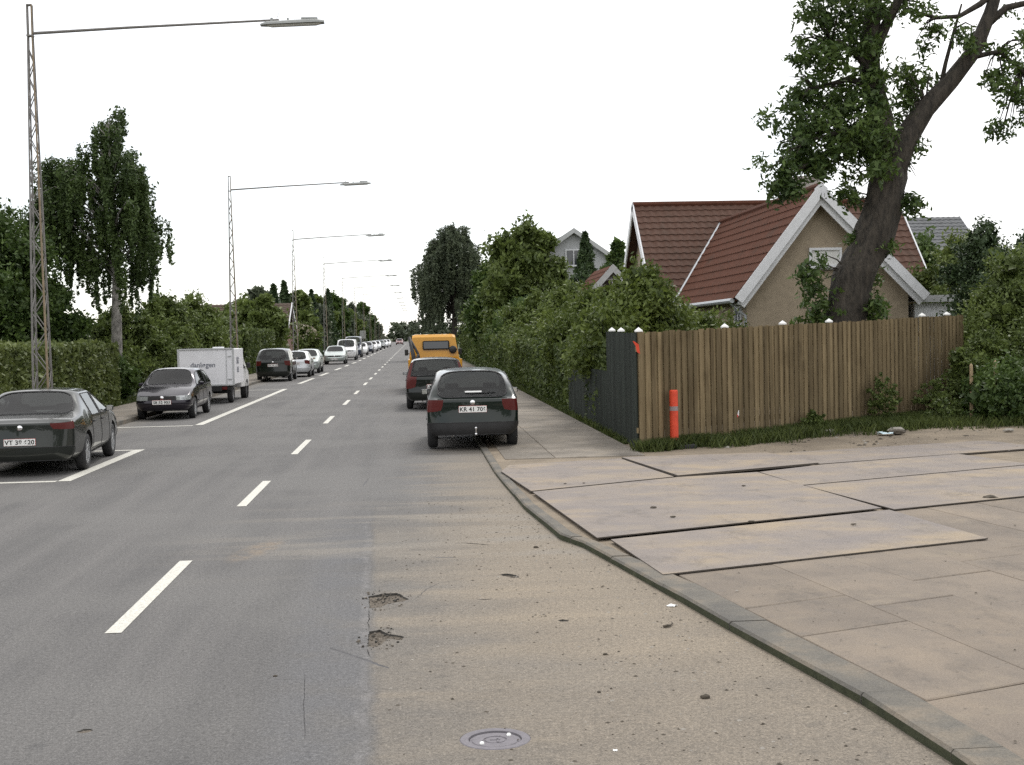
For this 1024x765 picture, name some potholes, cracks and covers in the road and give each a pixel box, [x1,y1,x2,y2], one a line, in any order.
crack [287,678,305,729]
pothole [356,627,407,650]
manhole cover [459,728,531,750]
pothole [356,590,411,611]
crack [330,648,389,668]
